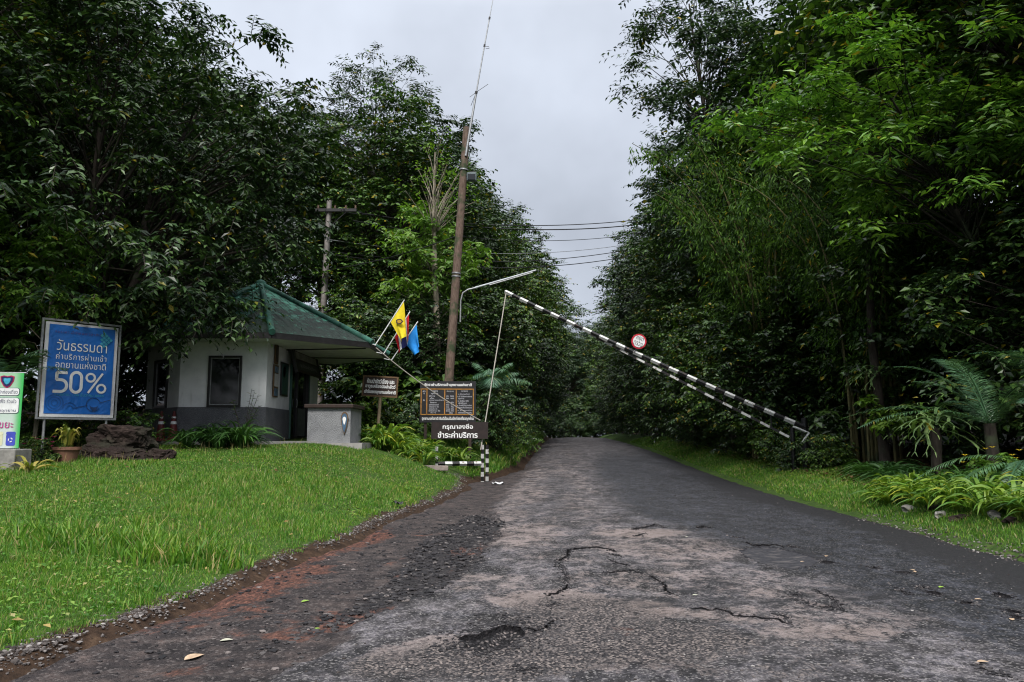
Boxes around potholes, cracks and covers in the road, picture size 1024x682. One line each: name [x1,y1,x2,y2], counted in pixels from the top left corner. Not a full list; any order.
pothole [459,625,526,653]
crack [404,477,1024,682]
